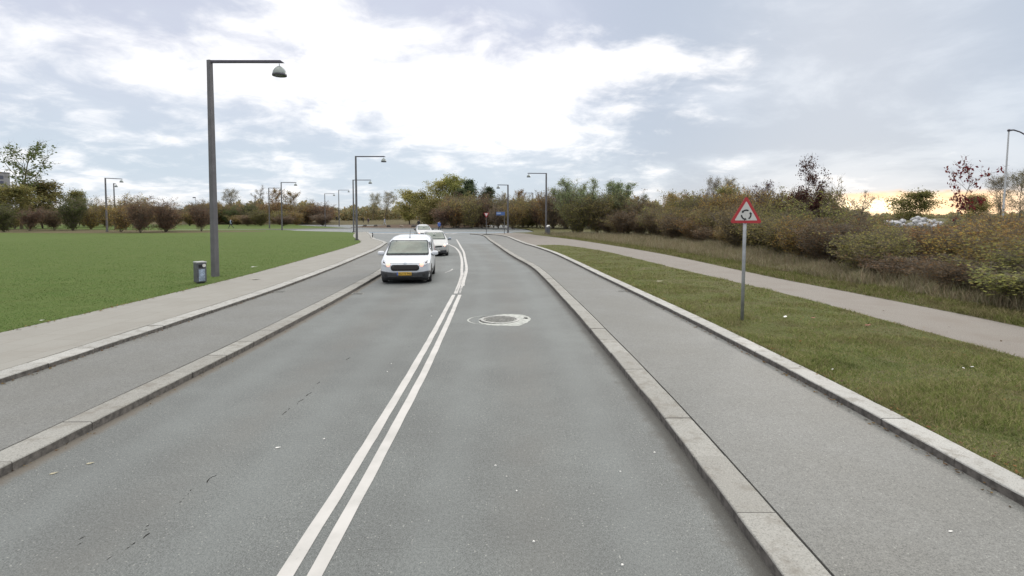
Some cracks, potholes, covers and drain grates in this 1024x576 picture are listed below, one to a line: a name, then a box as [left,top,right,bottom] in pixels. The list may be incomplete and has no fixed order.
manhole cover [467,314,531,326]
